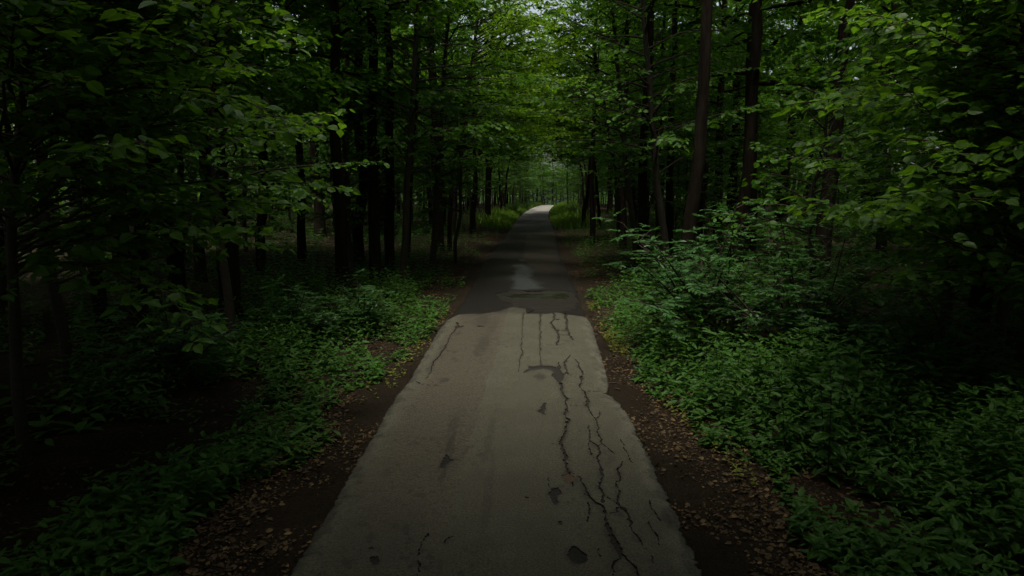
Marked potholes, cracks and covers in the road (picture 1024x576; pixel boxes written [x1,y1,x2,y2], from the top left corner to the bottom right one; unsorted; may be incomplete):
crack [518,312,661,576]
pothole [568,546,588,565]
pothole [495,290,579,314]
crack [417,533,453,575]
pothole [548,487,562,505]
crack [415,322,465,386]
